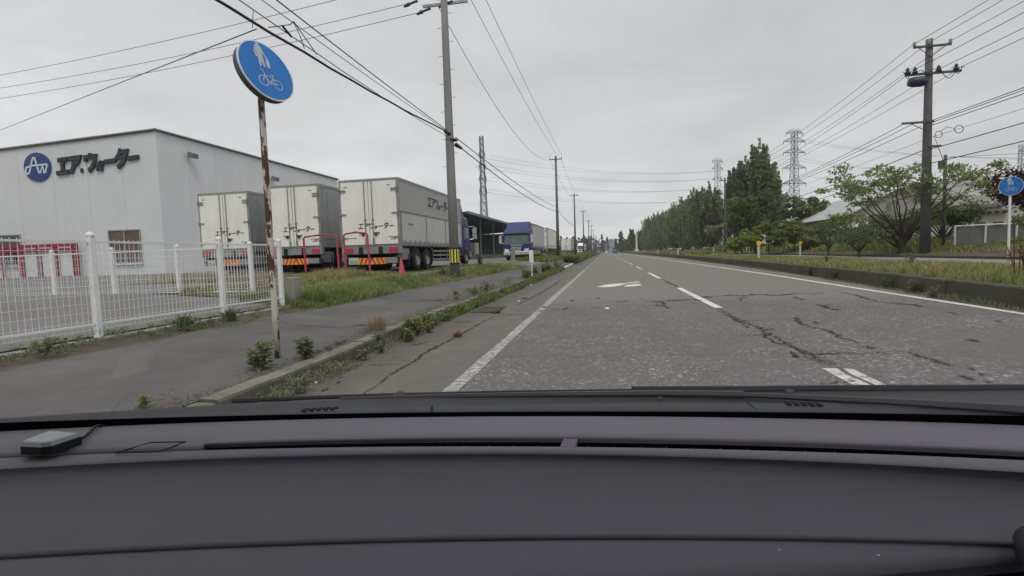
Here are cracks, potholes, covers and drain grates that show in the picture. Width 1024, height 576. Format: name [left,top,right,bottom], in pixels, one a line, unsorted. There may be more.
crack [656,292,882,383]
